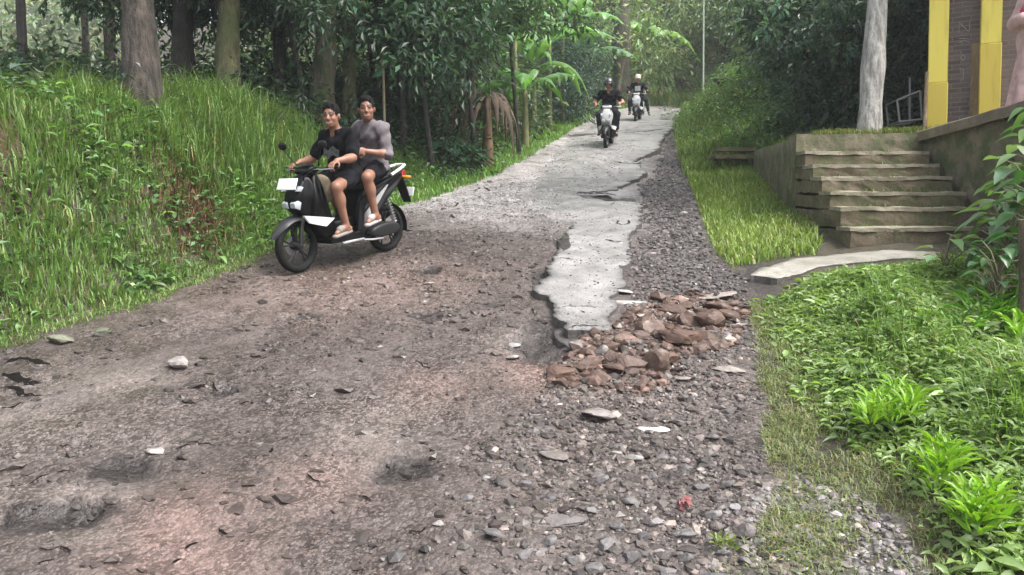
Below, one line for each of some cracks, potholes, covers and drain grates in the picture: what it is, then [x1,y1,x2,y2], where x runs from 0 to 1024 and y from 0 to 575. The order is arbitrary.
pothole [512,319,573,370]
pothole [369,455,435,486]
crack [0,356,51,409]
pothole [88,454,154,482]
pothole [3,499,121,536]
